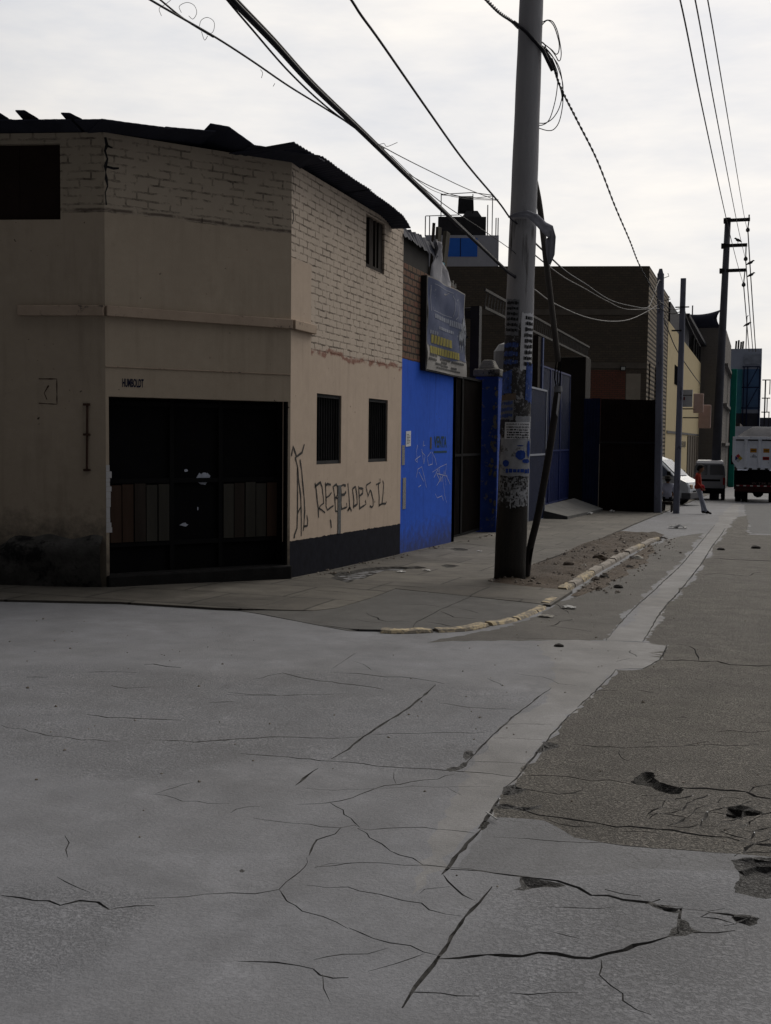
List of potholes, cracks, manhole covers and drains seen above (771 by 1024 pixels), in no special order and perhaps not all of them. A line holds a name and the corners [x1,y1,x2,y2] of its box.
crack [209,672,443,703]
crack [585,722,771,761]
pothole [514,877,565,891]
pothole [724,805,766,820]
crack [669,646,771,666]
crack [1,703,738,1015]
pothole [731,857,771,899]
pothole [631,771,684,794]
